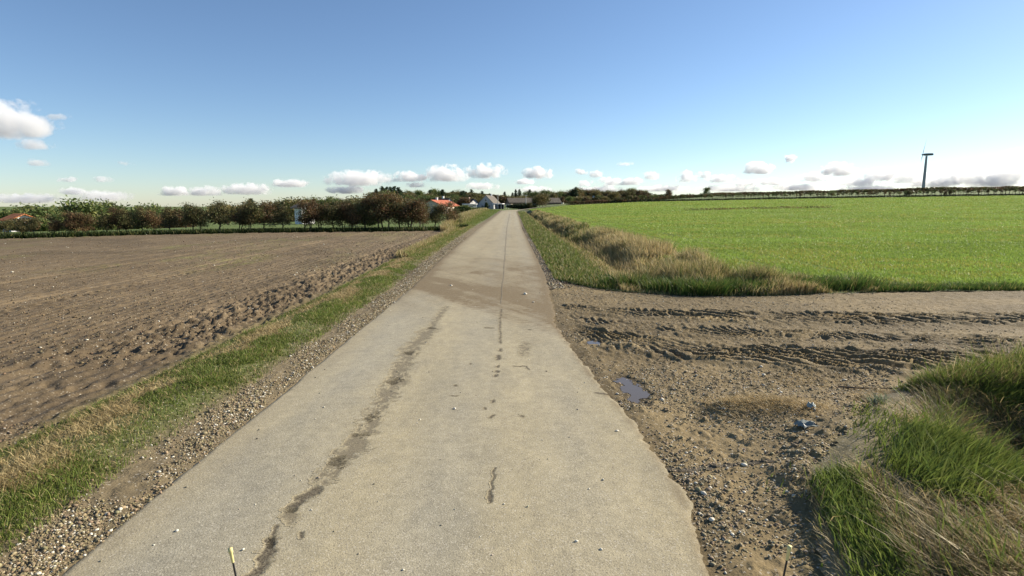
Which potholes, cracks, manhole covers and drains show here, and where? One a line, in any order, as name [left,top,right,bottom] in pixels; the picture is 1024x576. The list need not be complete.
crack [241,524,282,576]
crack [489,467,497,491]
